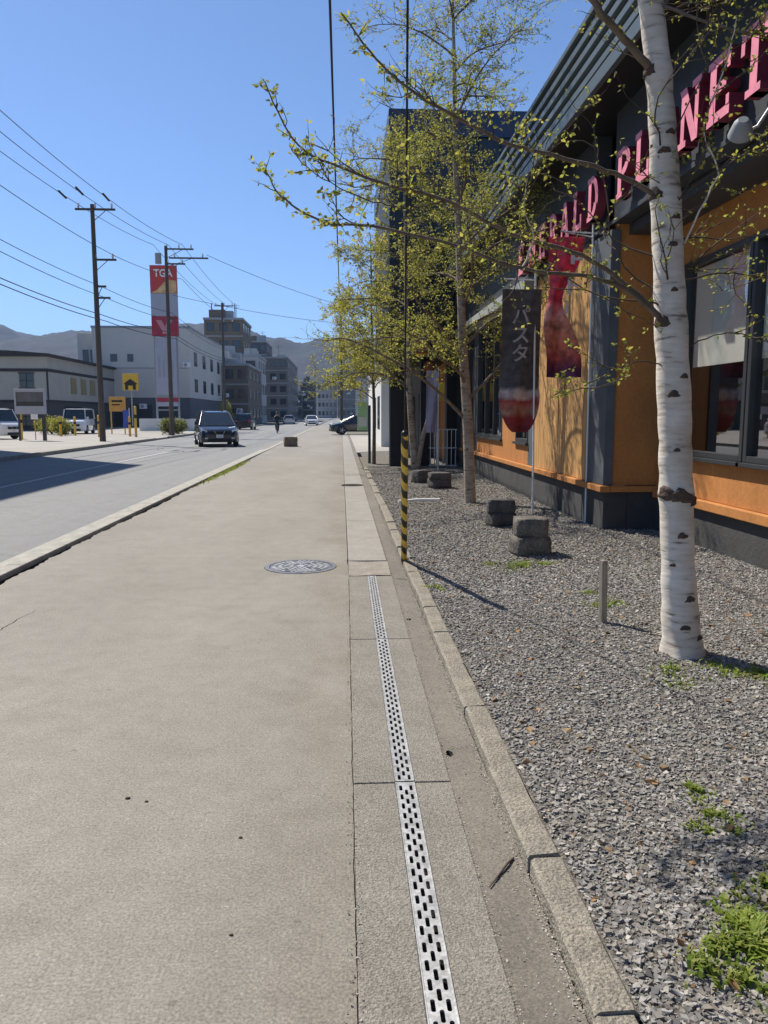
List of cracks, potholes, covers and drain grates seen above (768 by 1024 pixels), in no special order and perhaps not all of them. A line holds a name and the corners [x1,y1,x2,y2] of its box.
manhole cover [265,559,336,574]
